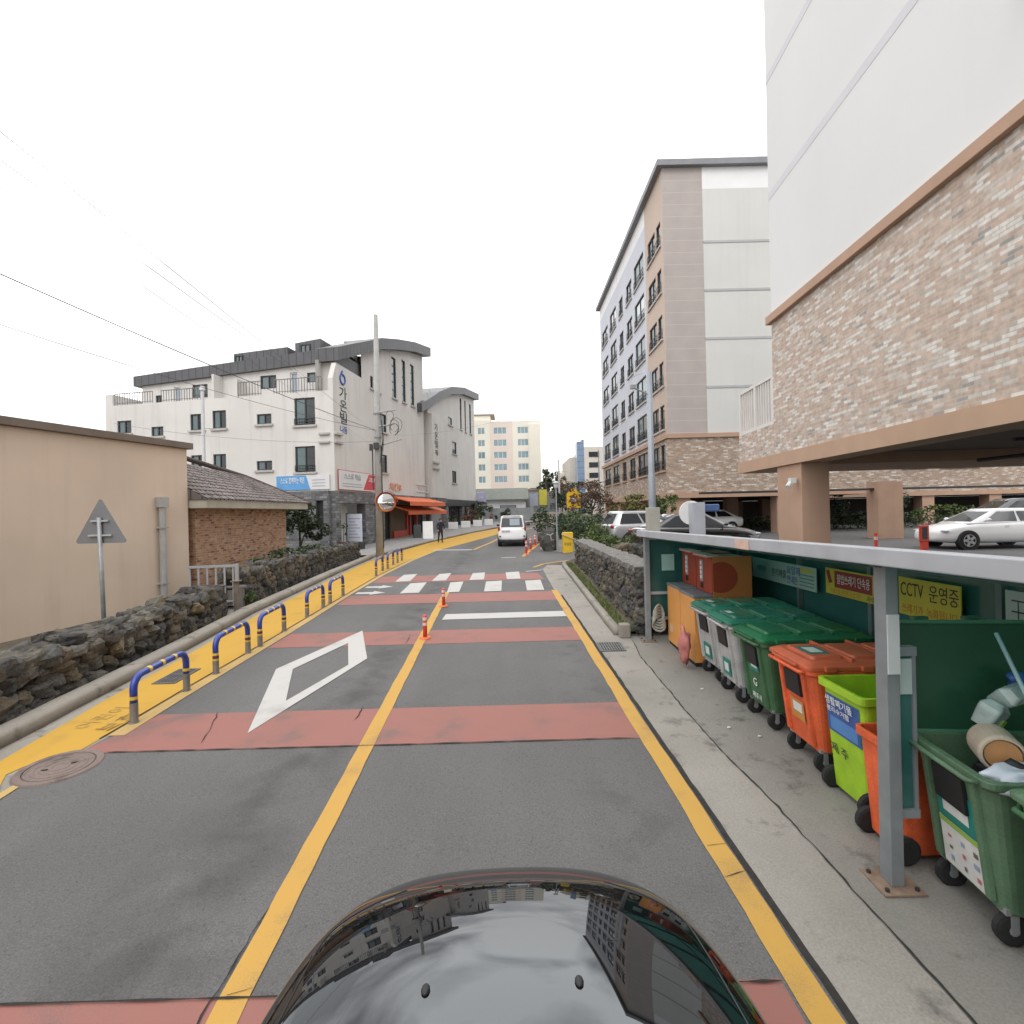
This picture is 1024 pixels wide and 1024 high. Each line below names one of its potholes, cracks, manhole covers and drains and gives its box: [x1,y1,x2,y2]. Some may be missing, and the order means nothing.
manhole cover [9,749,106,788]
drain grate [151,668,201,685]
drain grate [595,642,626,652]
